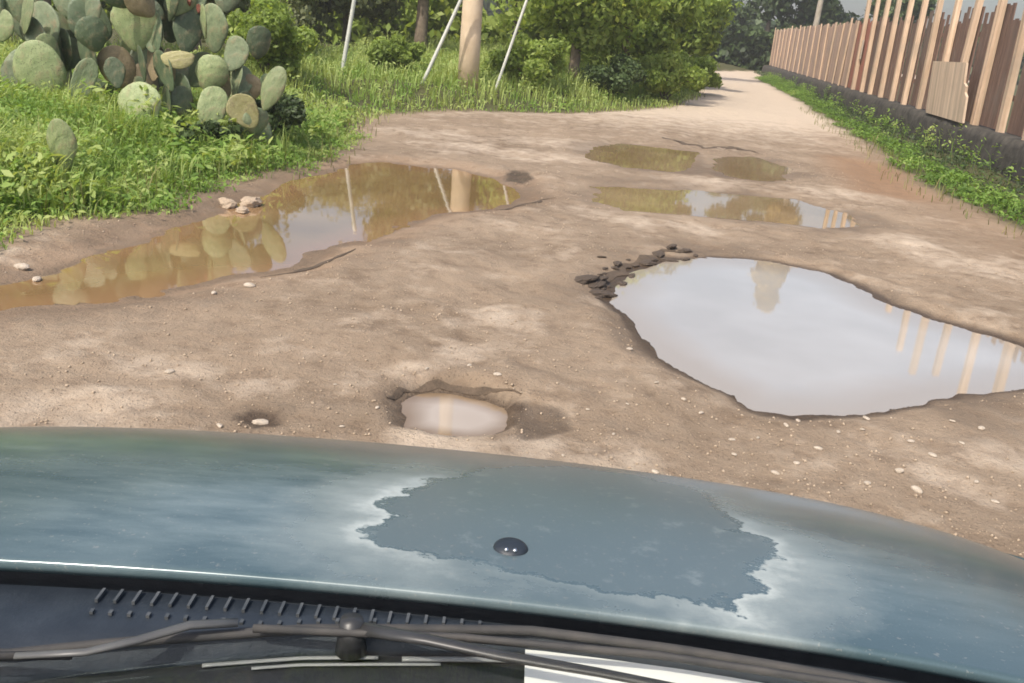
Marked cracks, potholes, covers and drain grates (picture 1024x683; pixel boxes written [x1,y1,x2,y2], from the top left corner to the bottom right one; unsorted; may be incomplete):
pothole [559,175,891,235]
crack [662,137,757,153]
pothole [224,405,294,431]
pothole [374,370,522,439]
pothole [691,150,825,187]
pothole [573,247,1024,429]
pothole [565,137,712,177]
pothole [0,154,561,325]
